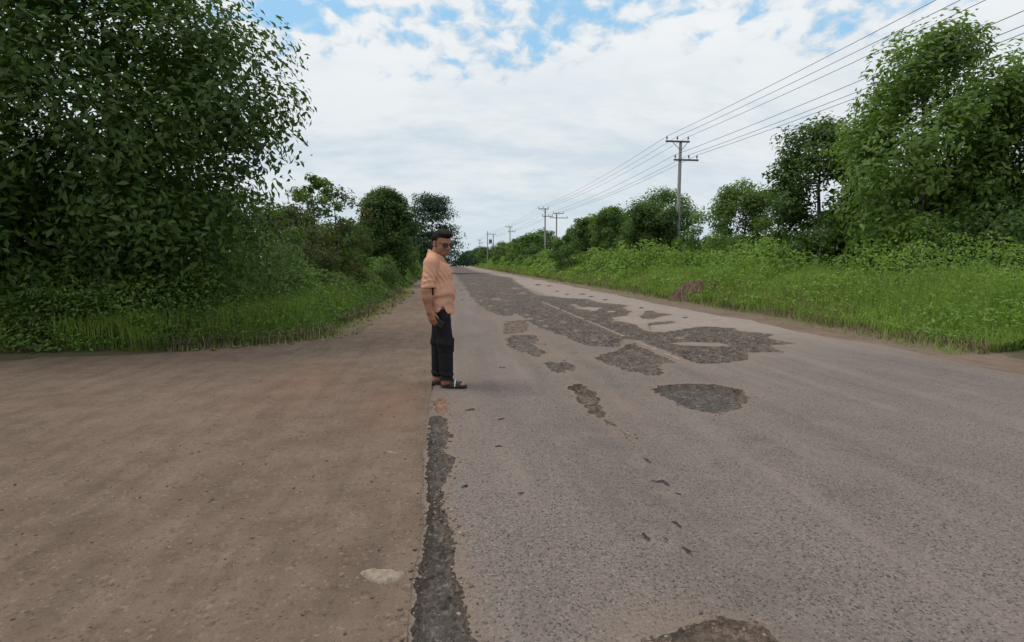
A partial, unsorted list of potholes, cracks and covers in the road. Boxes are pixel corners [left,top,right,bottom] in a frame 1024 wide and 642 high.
pothole [452,266,796,364]
pothole [595,343,676,376]
pothole [410,415,479,642]
pothole [567,384,606,418]
pothole [652,383,750,414]
pothole [544,362,576,374]
pothole [648,616,780,642]
